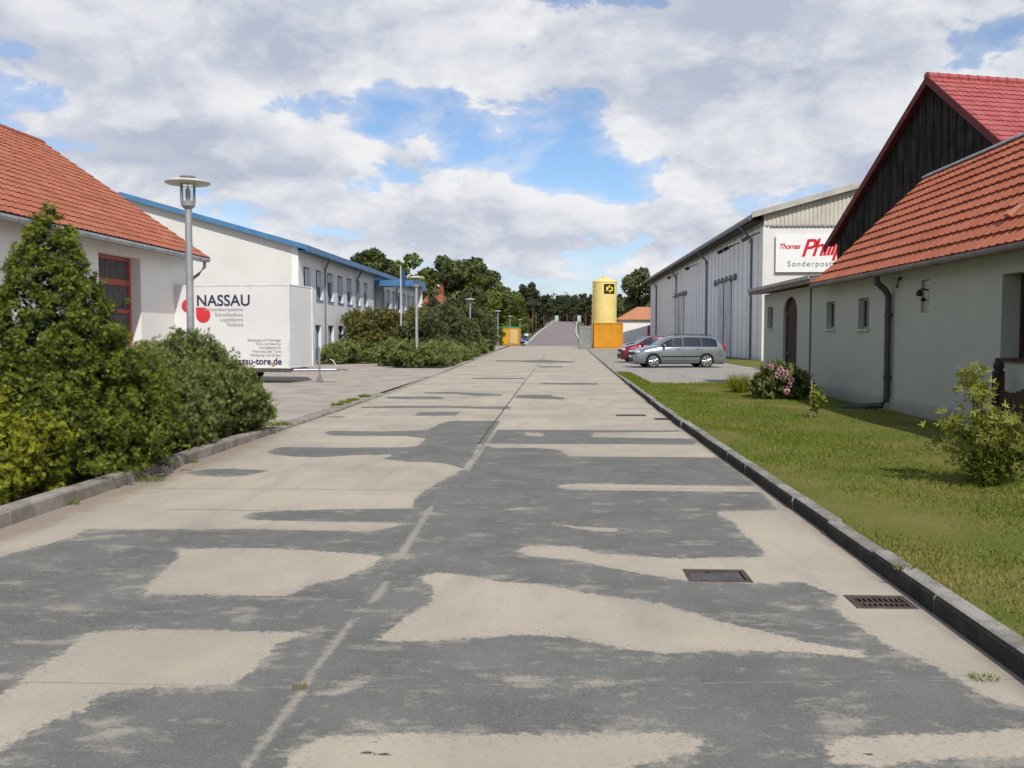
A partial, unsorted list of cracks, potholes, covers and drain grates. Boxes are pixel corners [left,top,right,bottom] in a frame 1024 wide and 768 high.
drain grate [843,595,919,609]
